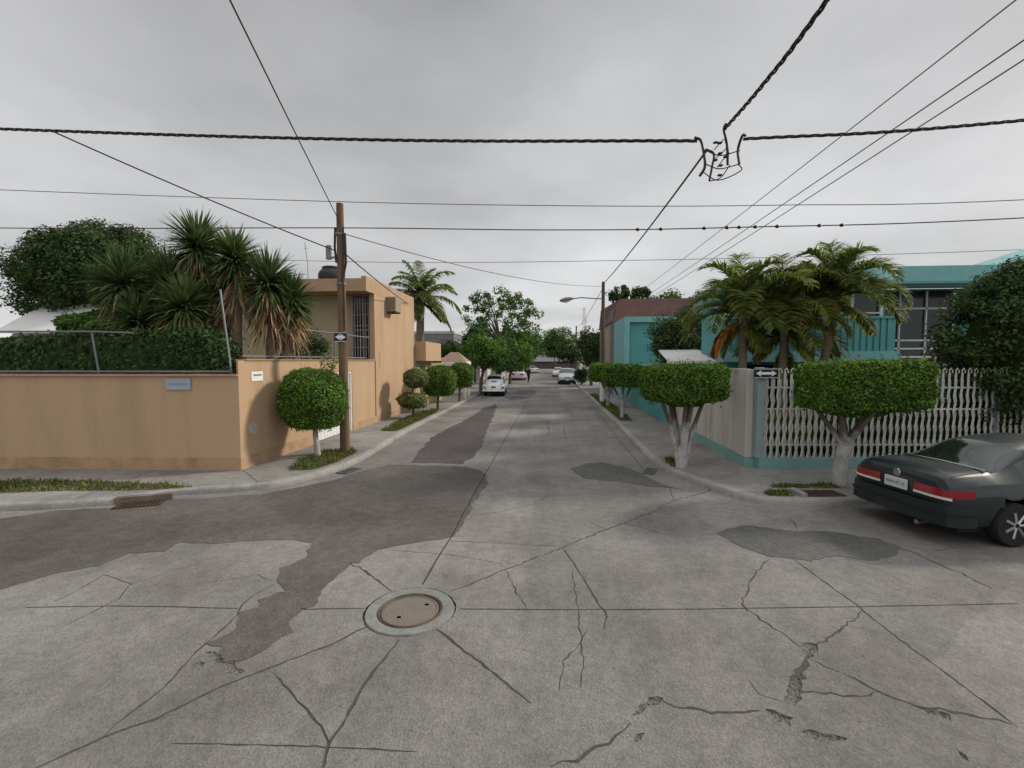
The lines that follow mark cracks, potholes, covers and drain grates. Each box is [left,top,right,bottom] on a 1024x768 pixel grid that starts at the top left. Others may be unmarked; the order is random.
drain grate [789,487,847,497]
drain grate [111,492,174,510]
pothole [631,696,663,716]
crack [662,547,1018,728]
manhole cover [363,588,456,637]
crack [35,488,710,768]
pothole [802,729,847,743]
pothole [765,709,793,727]
